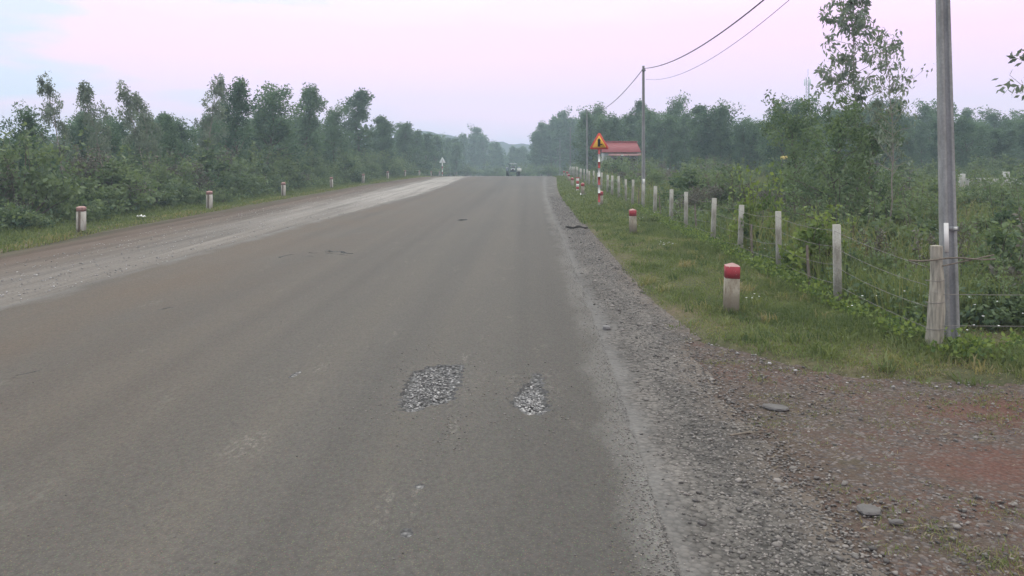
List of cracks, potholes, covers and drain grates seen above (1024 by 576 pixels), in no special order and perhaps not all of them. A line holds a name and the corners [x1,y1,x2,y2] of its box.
pothole [509,373,552,416]
pothole [395,364,466,413]
pothole [399,528,414,538]
